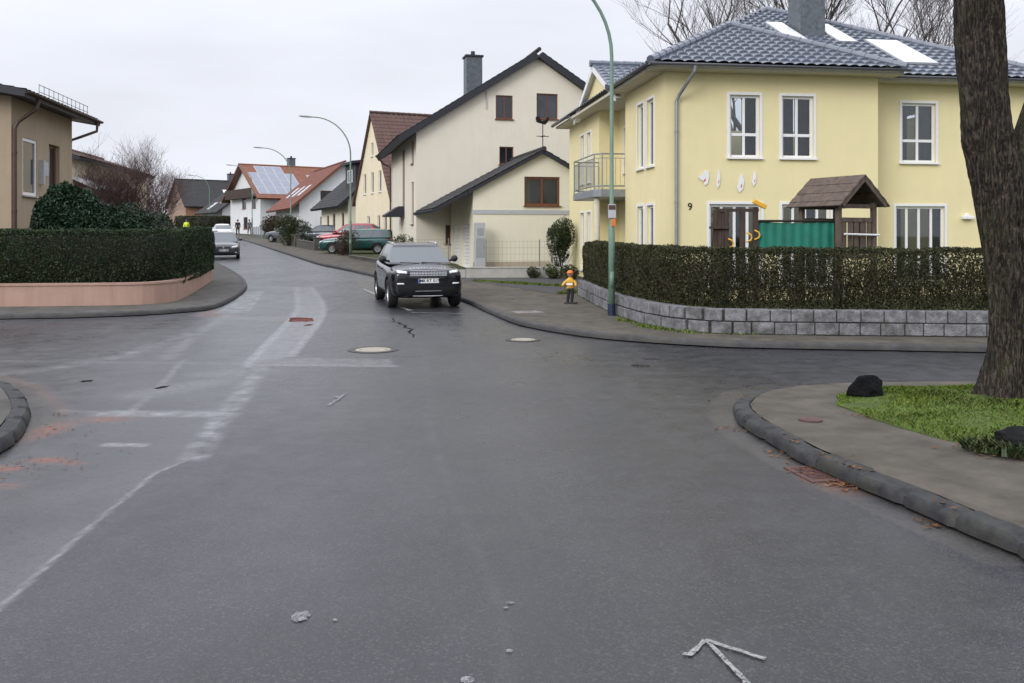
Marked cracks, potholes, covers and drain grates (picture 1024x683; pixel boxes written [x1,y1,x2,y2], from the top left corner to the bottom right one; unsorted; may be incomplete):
drain grate [783,465,843,483]
